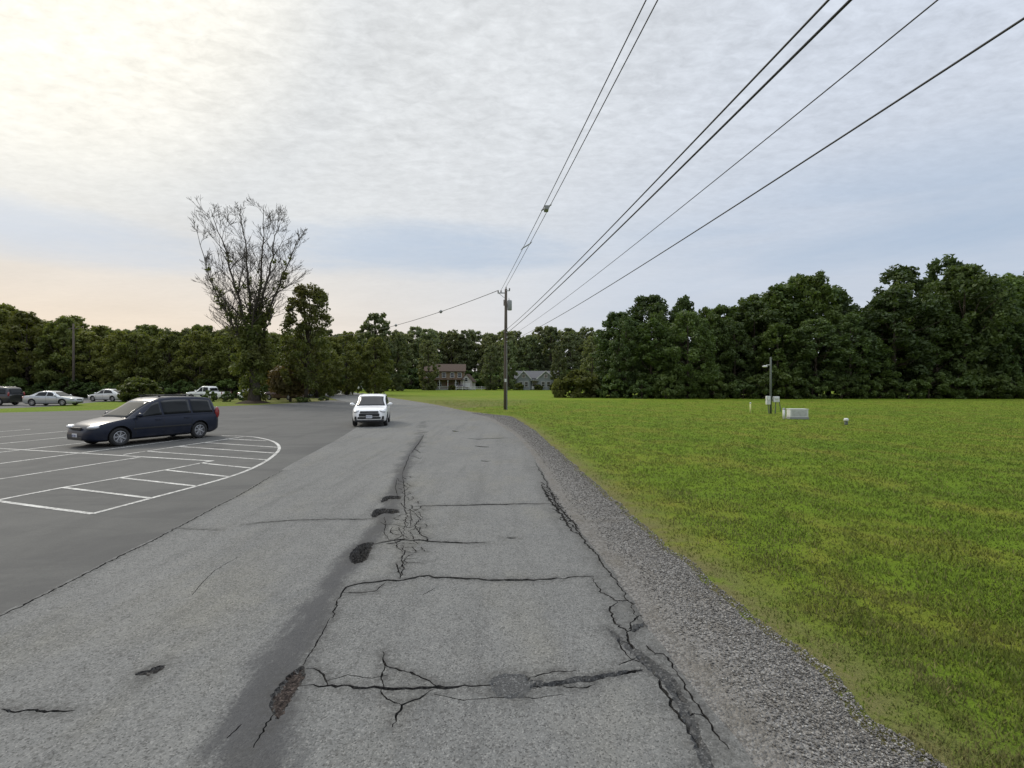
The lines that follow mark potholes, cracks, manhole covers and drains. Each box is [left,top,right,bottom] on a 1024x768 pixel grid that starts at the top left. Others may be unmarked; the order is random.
pothole [269,665,306,719]
pothole [349,542,374,564]
pothole [371,508,400,517]
crack [303,455,729,768]
pothole [135,665,166,676]
